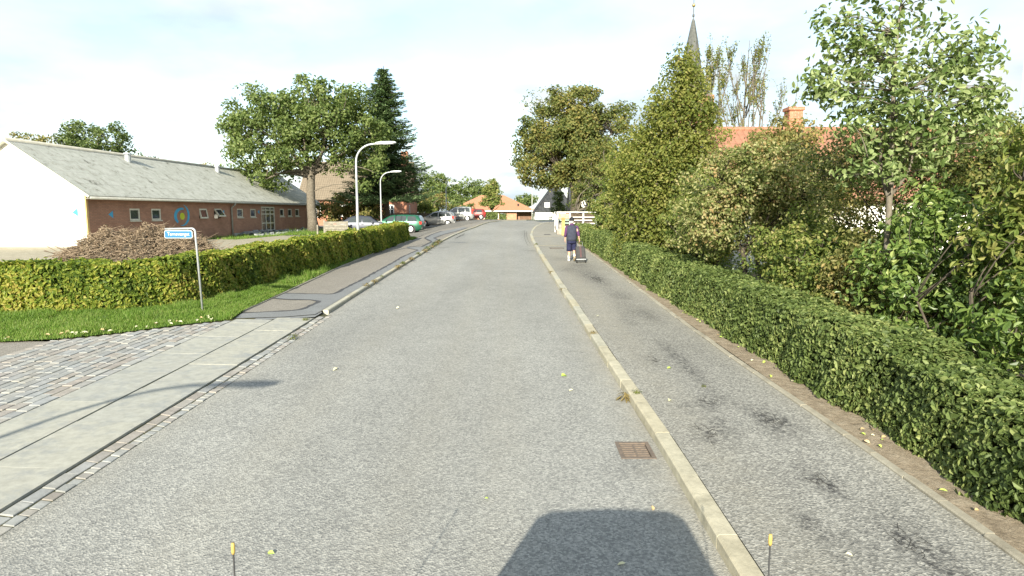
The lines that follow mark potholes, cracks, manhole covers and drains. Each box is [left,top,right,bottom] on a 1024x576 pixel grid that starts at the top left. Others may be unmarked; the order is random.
drain grate [615,442,657,459]
